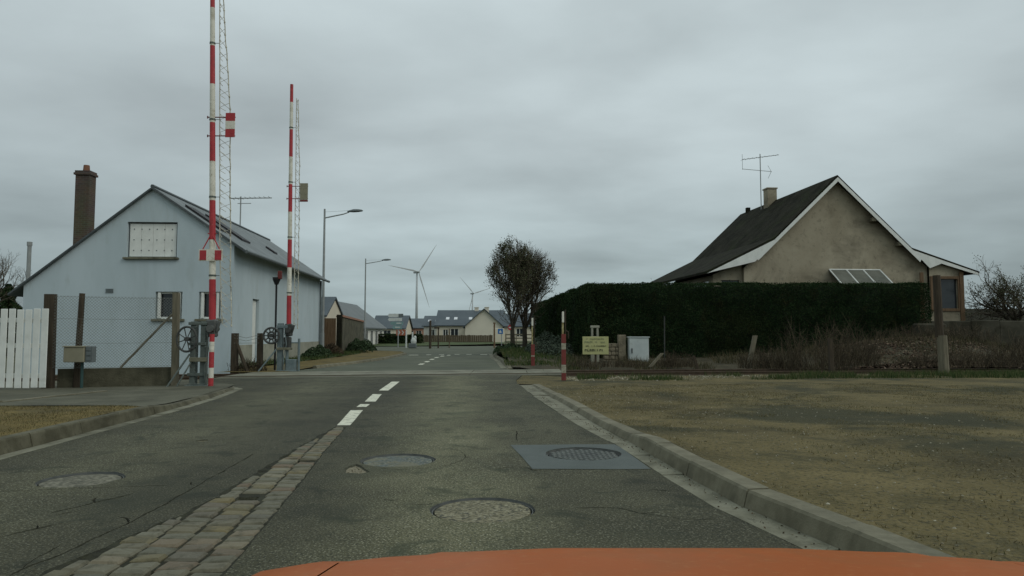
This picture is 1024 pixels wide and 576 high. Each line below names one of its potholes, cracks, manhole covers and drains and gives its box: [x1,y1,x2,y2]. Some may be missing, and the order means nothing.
manhole cover [430,497,535,523]
manhole cover [360,454,436,467]
manhole cover [35,472,126,488]
crack [586,507,705,520]
